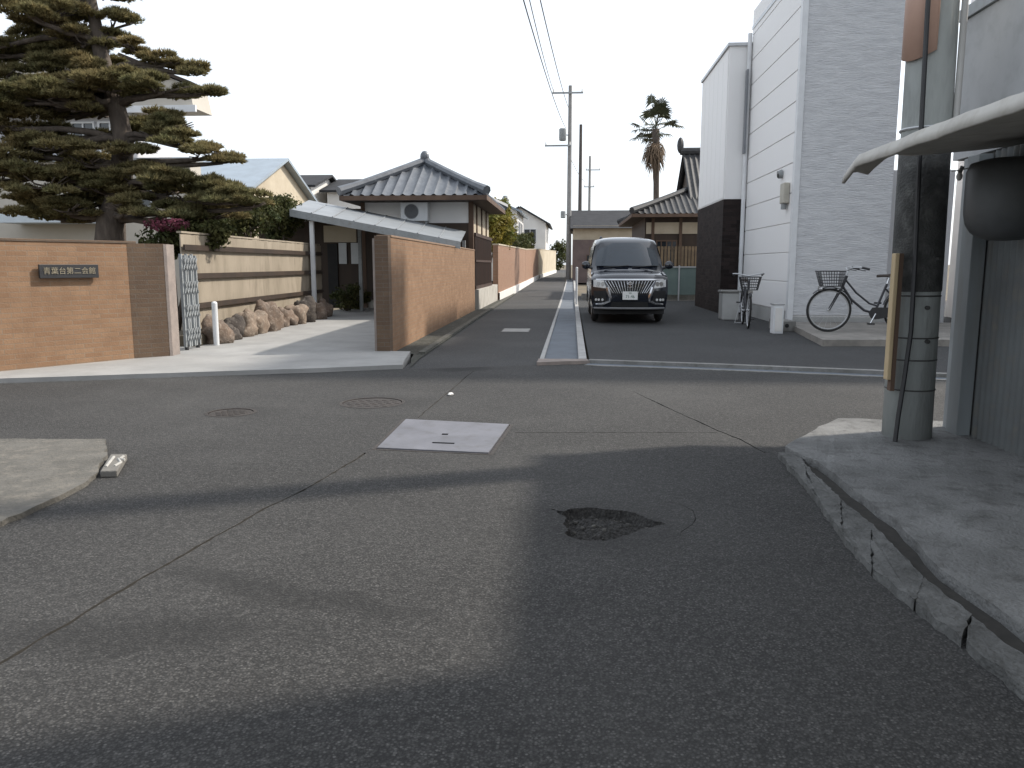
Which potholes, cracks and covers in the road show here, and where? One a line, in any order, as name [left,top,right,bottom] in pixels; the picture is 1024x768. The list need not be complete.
manhole cover [205,408,257,417]
pothole [551,507,665,541]
manhole cover [371,419,513,455]
manhole cover [339,397,405,408]
